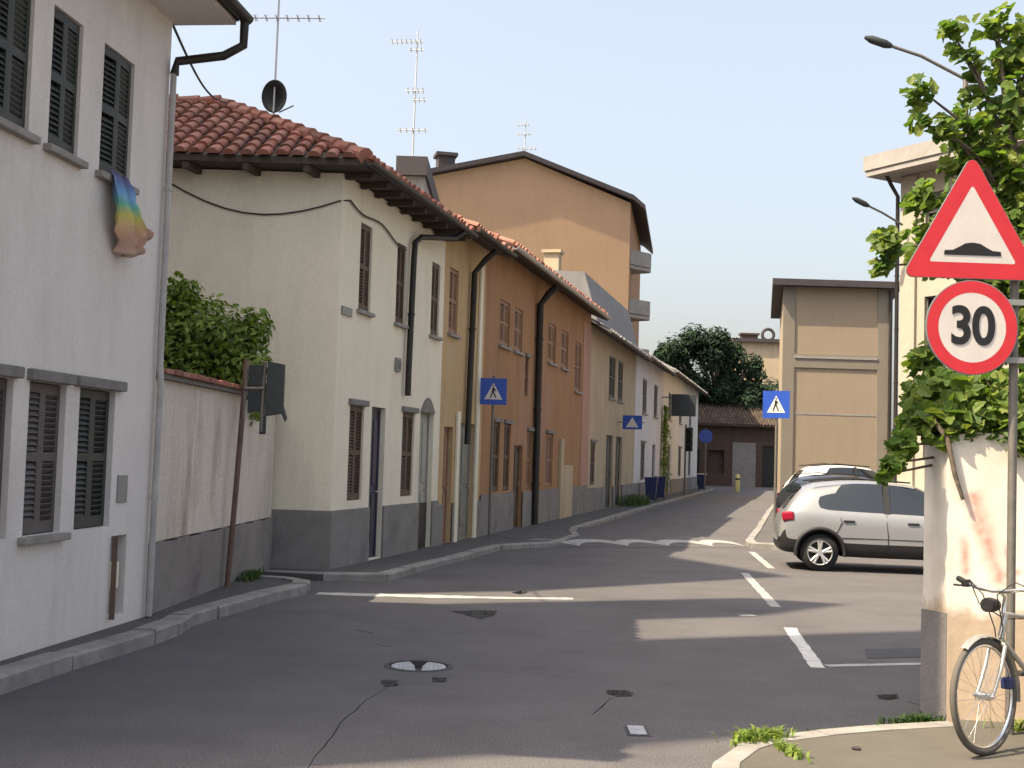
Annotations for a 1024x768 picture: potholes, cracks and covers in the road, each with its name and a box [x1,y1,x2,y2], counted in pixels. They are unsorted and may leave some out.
crack [308,688,387,768]
pothole [452,610,498,619]
manhole cover [624,725,651,737]
manhole cover [383,660,454,672]
